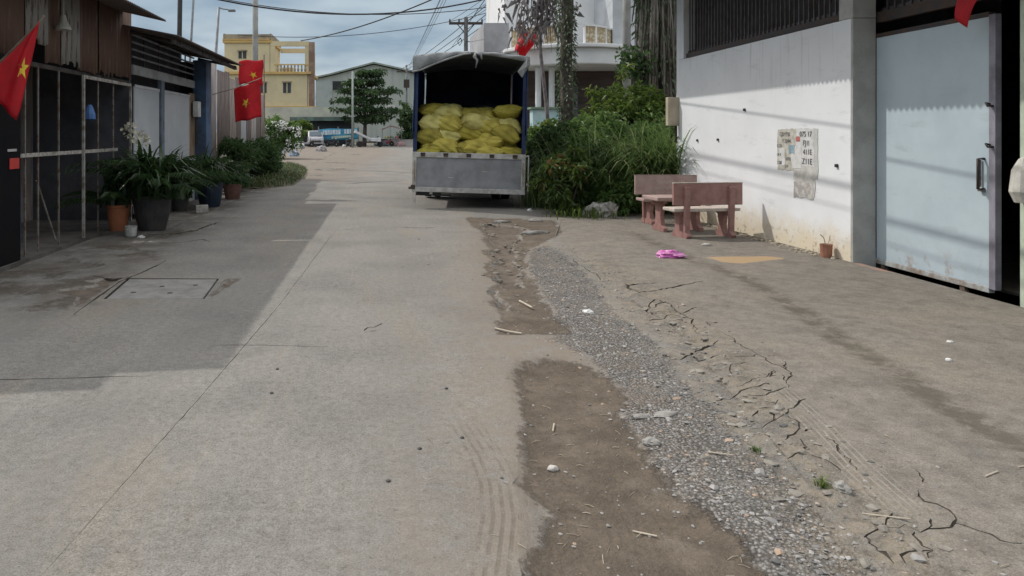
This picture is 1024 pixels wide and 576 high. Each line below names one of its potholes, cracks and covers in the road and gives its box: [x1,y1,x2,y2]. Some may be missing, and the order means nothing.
crack [573,260,857,473]
crack [864,470,1022,564]
manhole cover [104,278,219,299]
